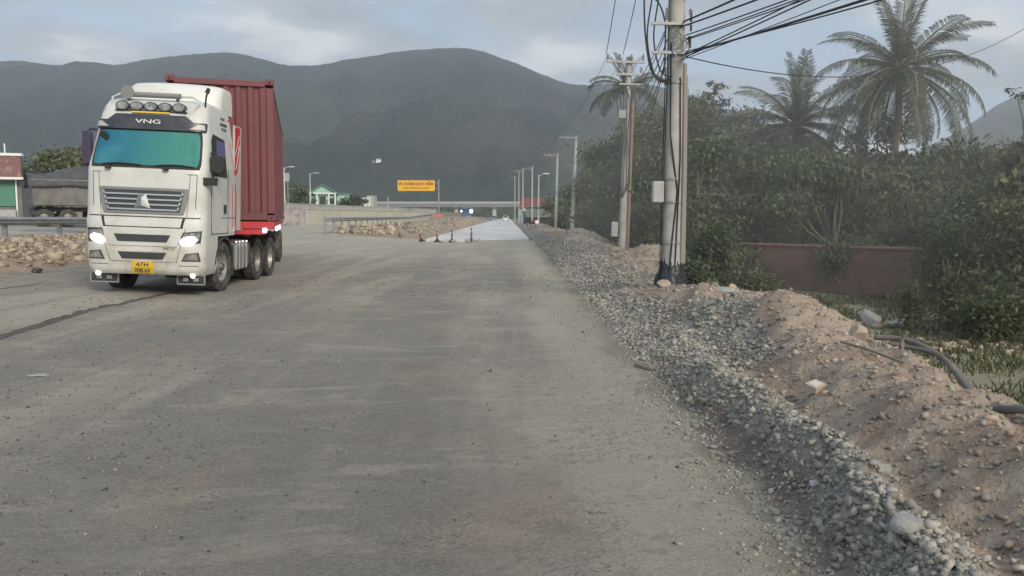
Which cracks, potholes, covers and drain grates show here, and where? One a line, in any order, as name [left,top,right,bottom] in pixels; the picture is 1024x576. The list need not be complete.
crack [0,282,183,339]
